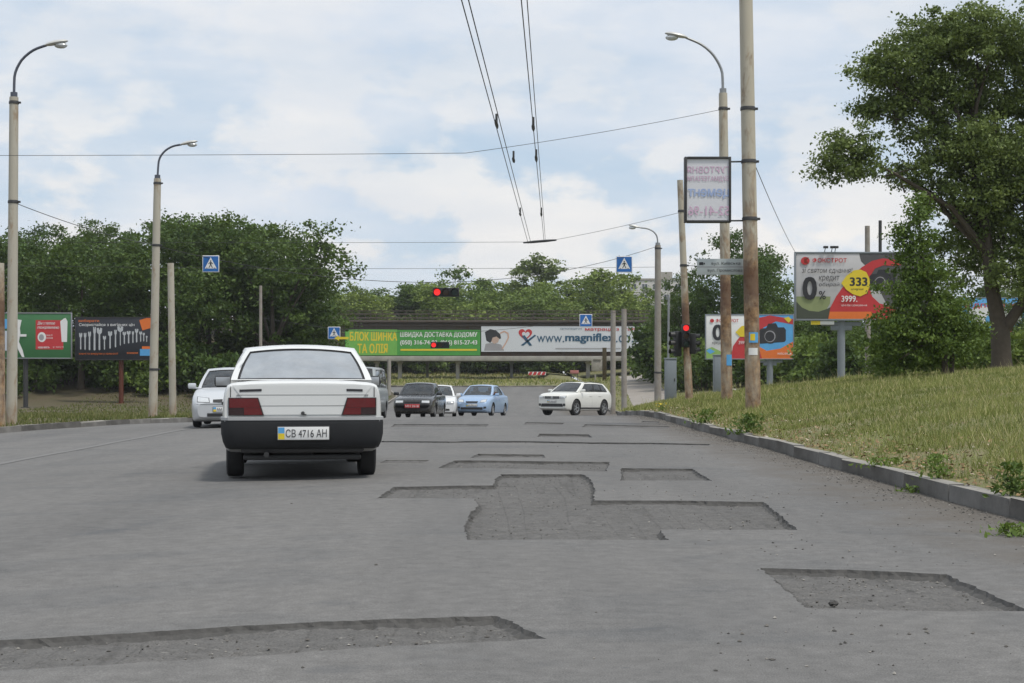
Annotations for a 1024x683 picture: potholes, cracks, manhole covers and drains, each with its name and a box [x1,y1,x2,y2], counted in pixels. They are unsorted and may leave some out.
pothole [379,474,797,540]
pothole [761,568,1024,611]
pothole [0,616,546,671]
pothole [439,460,609,471]
pothole [620,468,712,481]
